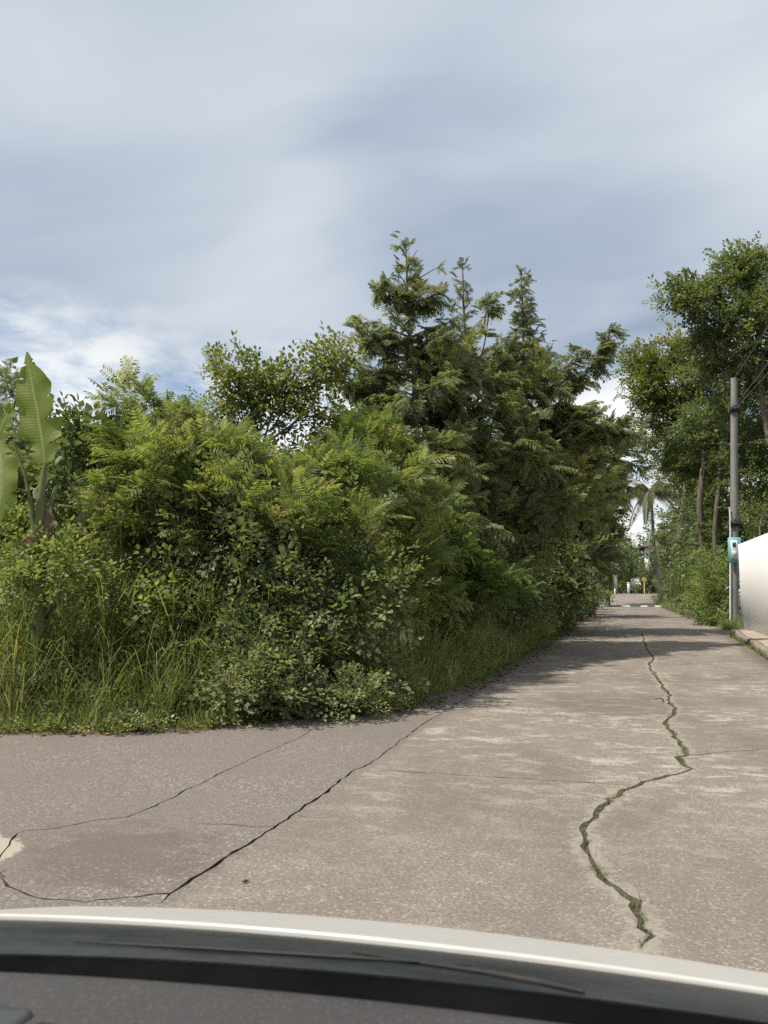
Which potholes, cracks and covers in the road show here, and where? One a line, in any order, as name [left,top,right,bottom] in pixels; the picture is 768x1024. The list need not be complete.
crack [0,728,314,857]
crack [386,632,760,949]
